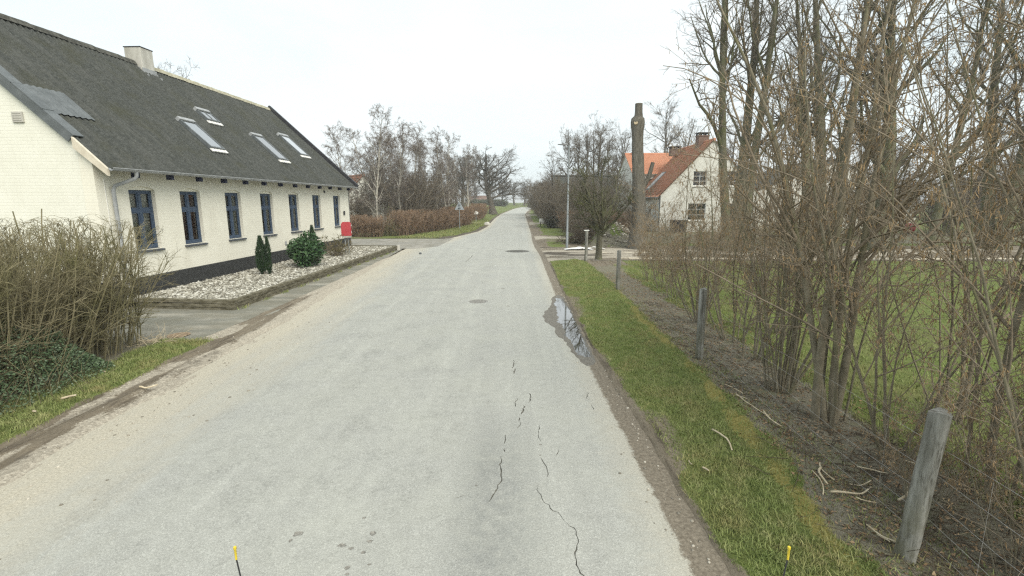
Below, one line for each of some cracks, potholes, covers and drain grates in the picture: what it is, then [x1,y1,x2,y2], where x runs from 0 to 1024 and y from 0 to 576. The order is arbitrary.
crack [490,393,584,576]
